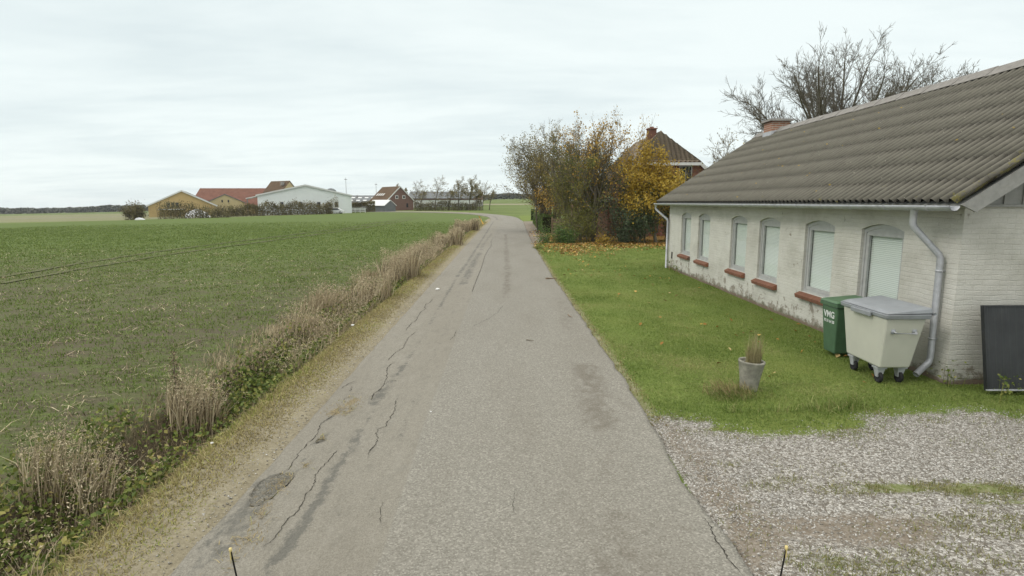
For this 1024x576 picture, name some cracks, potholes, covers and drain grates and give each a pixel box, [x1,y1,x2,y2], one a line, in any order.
pothole [249,472,294,507]
crack [265,417,334,545]
crack [367,299,433,458]
